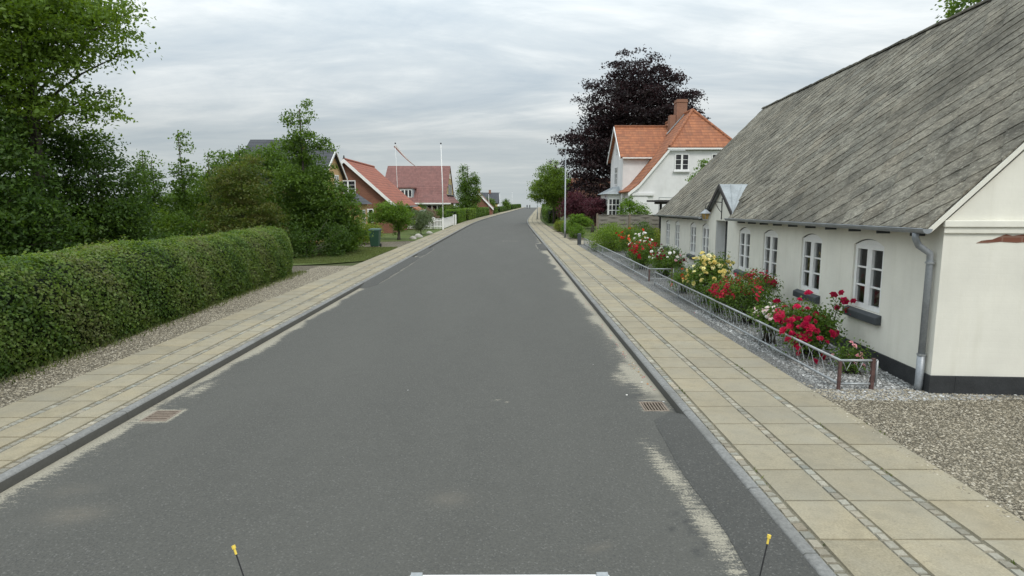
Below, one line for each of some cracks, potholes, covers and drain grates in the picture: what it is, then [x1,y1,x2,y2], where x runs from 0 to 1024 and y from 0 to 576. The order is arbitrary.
drain grate [140,410,182,421]
drain grate [639,402,669,411]
